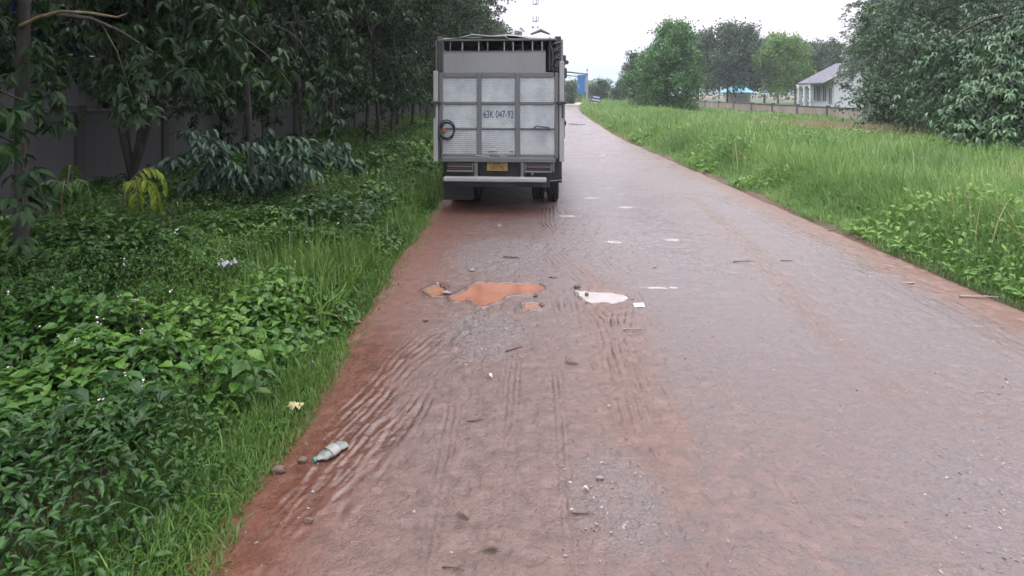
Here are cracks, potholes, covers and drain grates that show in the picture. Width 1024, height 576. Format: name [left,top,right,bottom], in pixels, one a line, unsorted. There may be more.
pothole [571,288,633,306]
pothole [446,281,549,309]
pothole [419,282,449,297]
